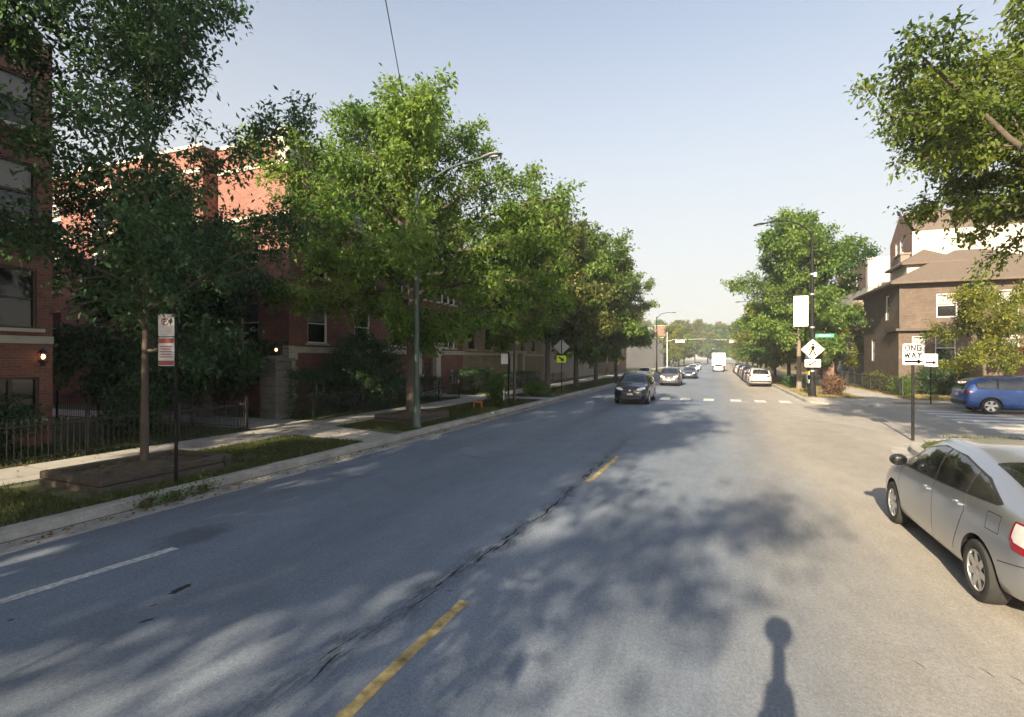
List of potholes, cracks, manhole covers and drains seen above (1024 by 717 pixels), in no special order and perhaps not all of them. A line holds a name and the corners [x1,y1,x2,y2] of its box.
crack [281,438,629,698]
